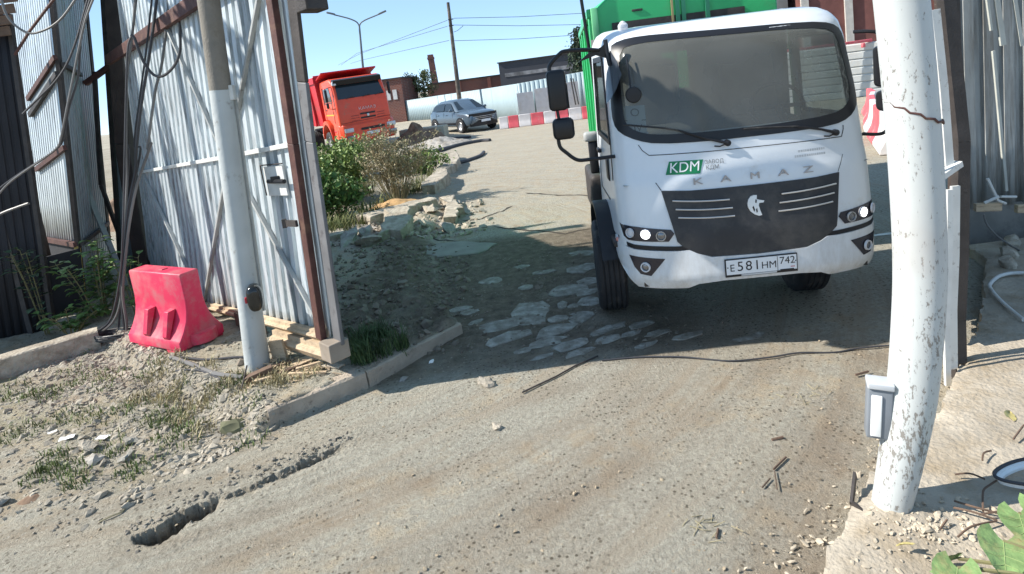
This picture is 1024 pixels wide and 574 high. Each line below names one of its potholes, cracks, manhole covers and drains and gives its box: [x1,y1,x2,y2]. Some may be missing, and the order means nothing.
pothole [90,480,235,574]
